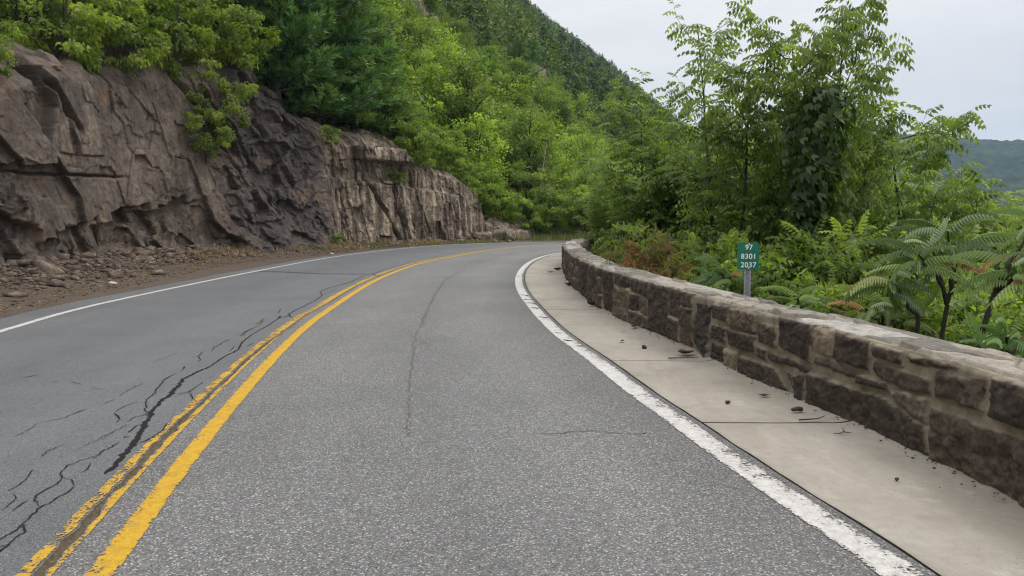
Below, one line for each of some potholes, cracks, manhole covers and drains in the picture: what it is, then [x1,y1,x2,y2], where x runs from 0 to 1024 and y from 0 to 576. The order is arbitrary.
crack [397,271,499,436]
crack [0,263,408,576]
